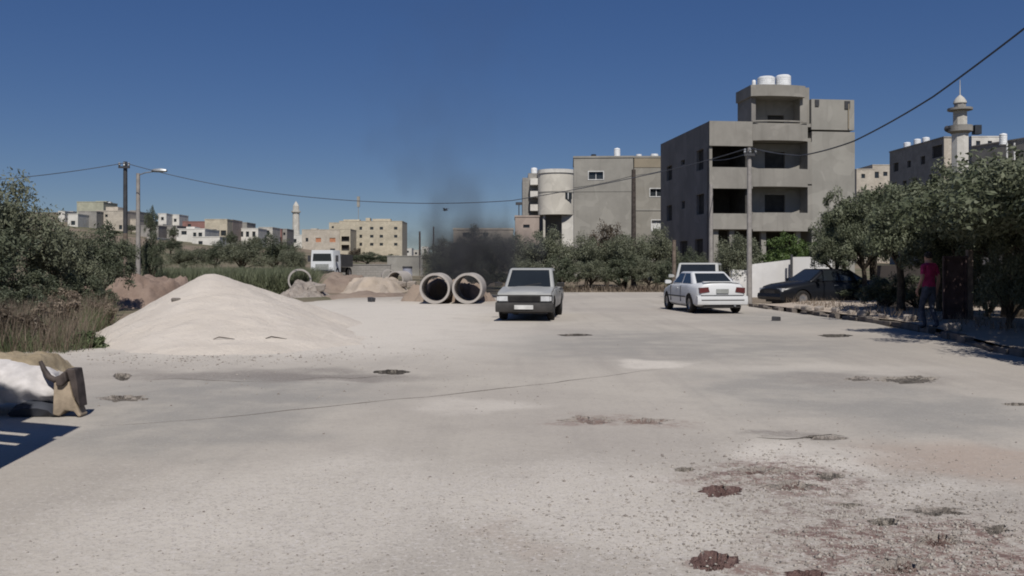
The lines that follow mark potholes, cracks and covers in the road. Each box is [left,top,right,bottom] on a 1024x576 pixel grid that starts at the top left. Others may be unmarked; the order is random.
pothole [874,375,939,384]
pothole [689,550,741,572]
pothole [557,415,615,425]
pothole [113,373,132,381]
pothole [697,485,743,498]
crack [104,368,665,426]
pothole [904,507,971,517]
